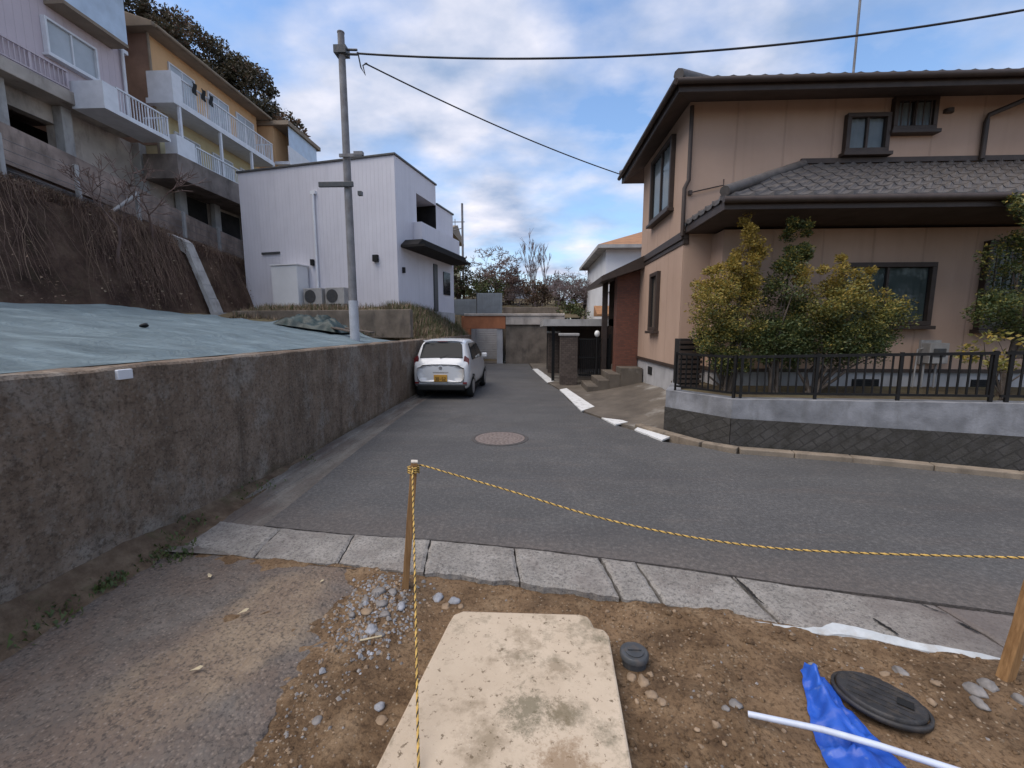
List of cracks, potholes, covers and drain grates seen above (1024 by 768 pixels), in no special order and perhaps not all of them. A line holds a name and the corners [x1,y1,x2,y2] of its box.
crack [873,601,980,635]
manhole cover [830,671,935,734]
manhole cover [472,431,528,446]
